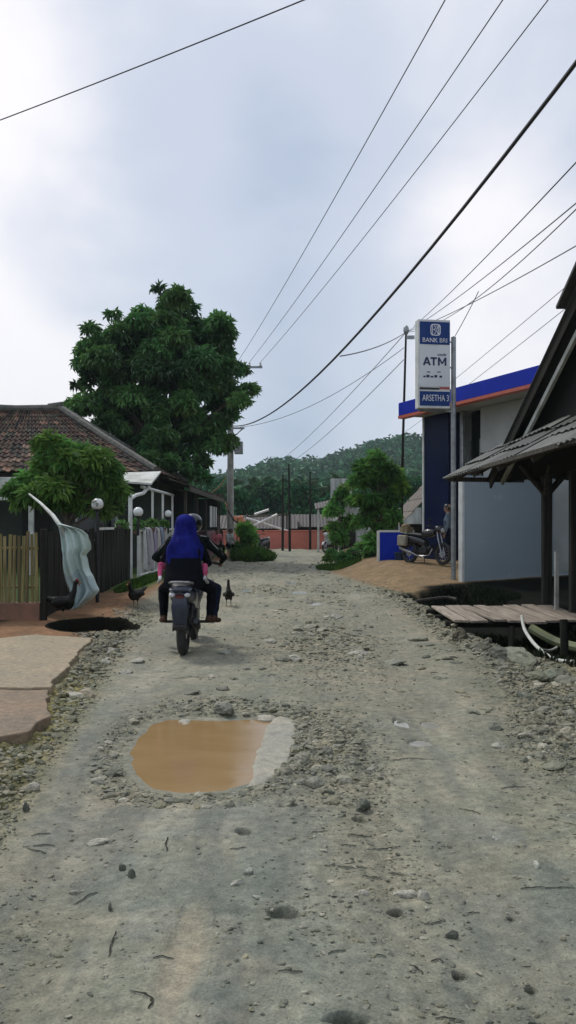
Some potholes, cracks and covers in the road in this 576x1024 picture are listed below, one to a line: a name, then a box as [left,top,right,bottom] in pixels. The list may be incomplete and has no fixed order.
pothole [45,617,141,633]
pothole [111,708,300,798]
